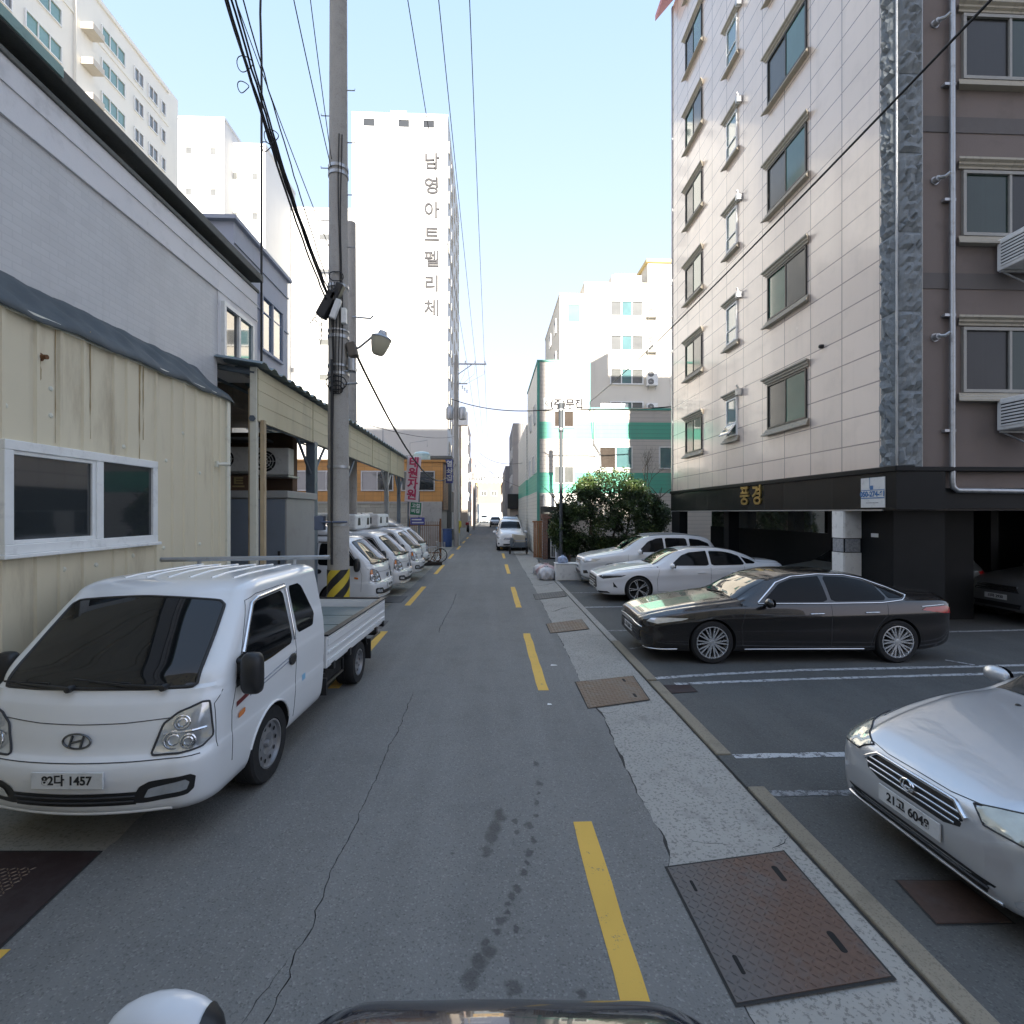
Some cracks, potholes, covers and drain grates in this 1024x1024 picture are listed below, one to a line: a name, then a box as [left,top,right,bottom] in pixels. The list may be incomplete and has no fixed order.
manhole cover [575,676,650,709]
manhole cover [894,880,1016,925]
manhole cover [0,851,103,949]
manhole cover [546,619,589,633]
manhole cover [664,850,897,1007]
crack [242,691,414,1024]
manhole cover [663,685,698,694]
manhole cover [533,591,567,600]
